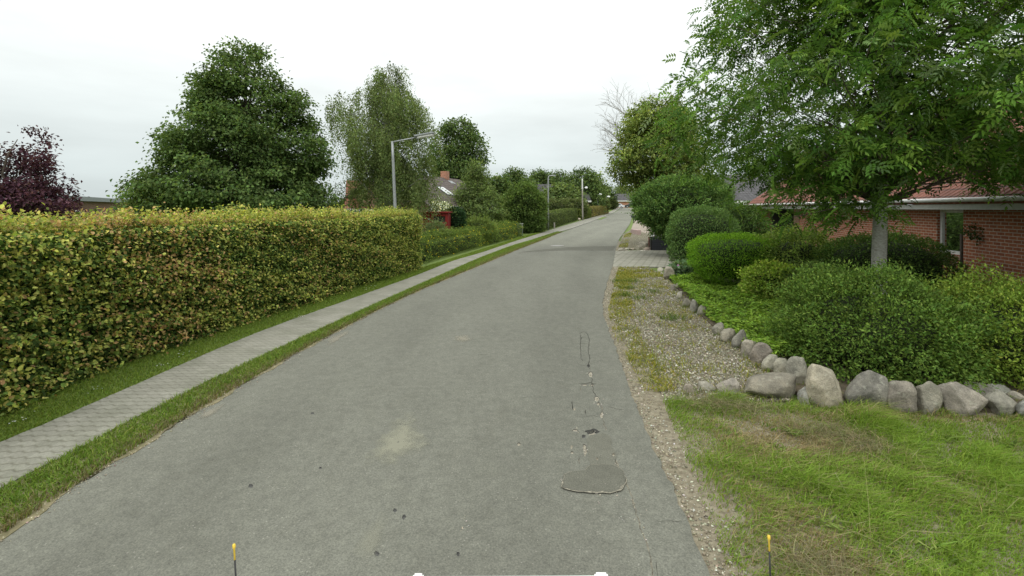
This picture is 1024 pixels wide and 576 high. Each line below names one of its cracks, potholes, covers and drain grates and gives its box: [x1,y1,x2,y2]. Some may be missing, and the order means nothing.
crack [571,332,622,430]
